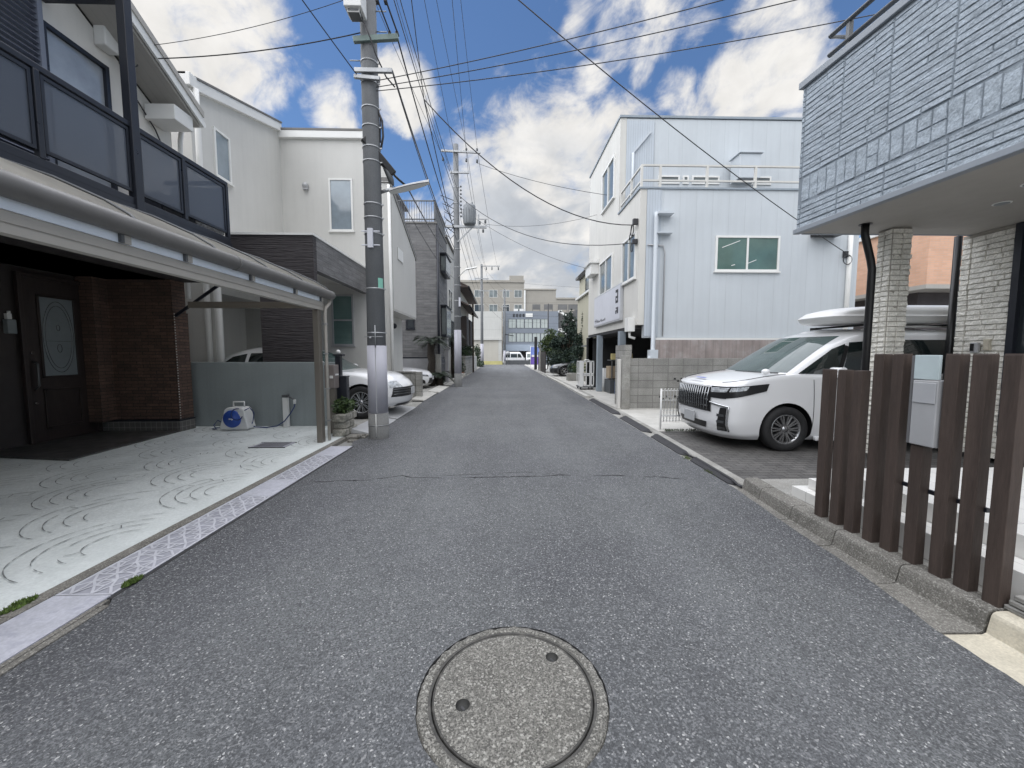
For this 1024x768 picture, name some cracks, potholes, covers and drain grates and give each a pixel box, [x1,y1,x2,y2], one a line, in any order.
manhole cover [416,626,610,768]
crack [328,472,678,482]
